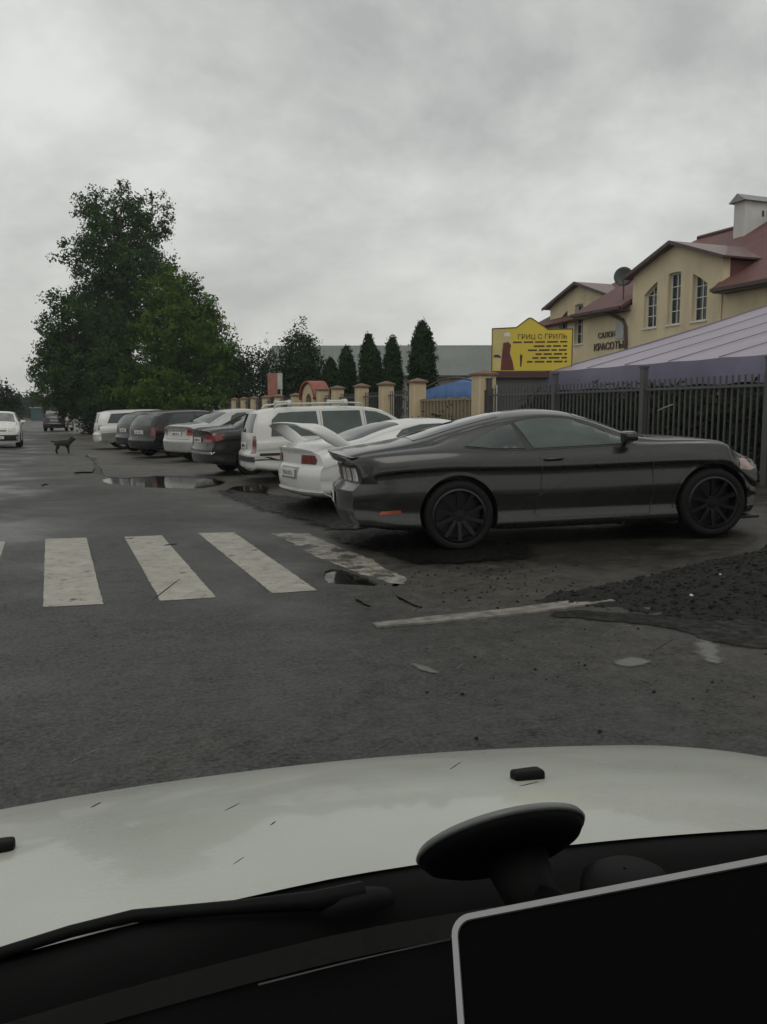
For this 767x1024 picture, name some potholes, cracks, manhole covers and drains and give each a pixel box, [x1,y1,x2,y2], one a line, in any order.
pothole [324,569,379,586]
